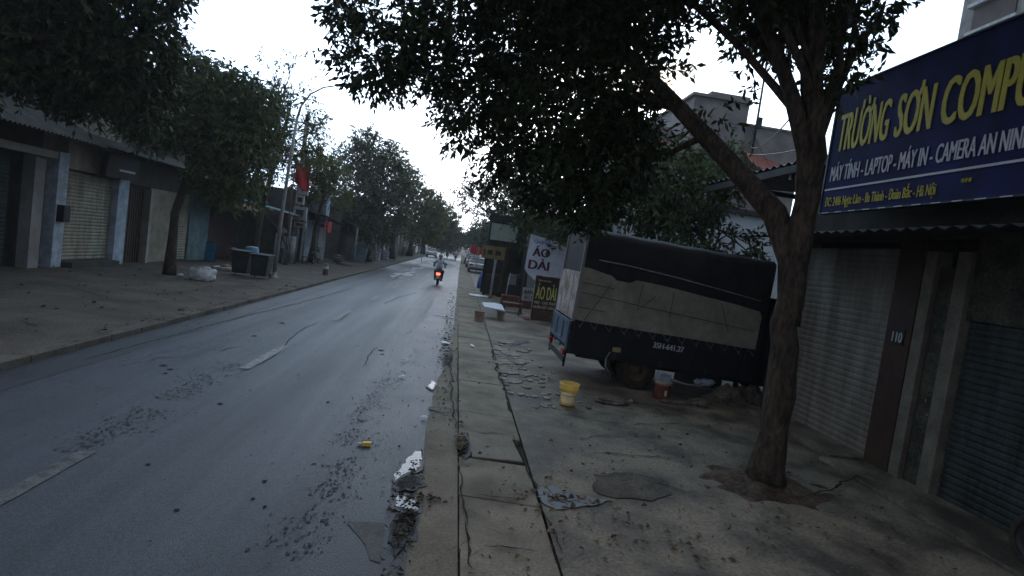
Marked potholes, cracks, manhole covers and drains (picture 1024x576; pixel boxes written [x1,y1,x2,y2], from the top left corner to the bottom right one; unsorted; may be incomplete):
pothole [391,474,427,491]
pothole [388,510,420,555]
